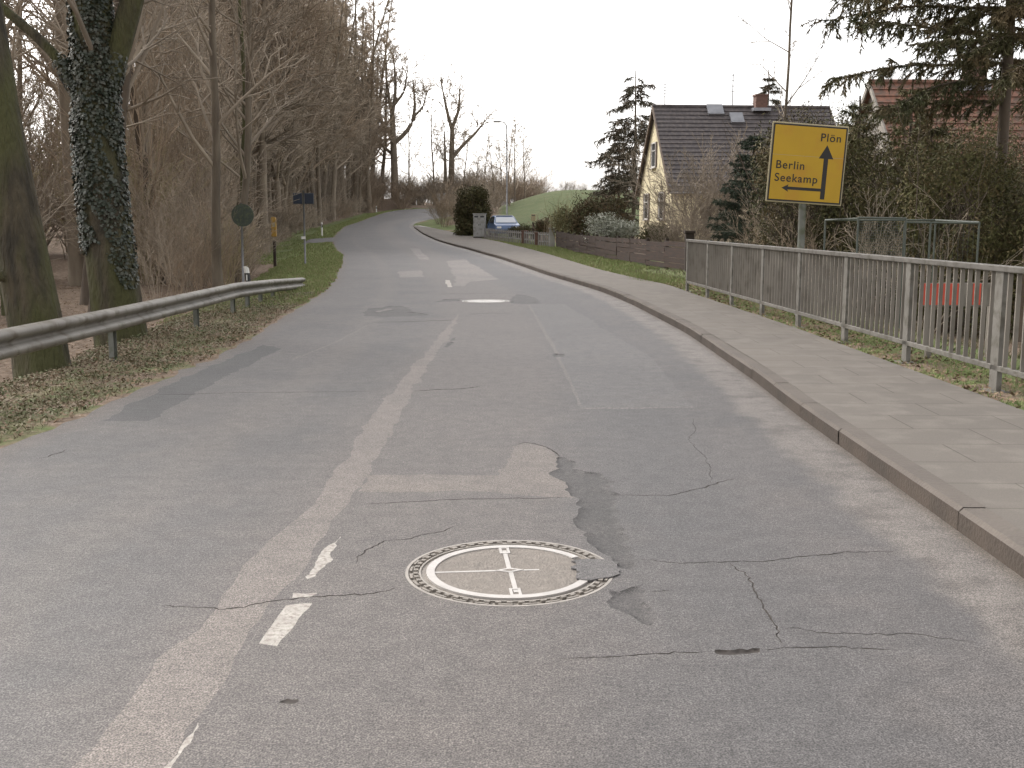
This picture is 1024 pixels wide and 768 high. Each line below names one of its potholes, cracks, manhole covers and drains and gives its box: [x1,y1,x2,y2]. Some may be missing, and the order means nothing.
crack [167,588,394,610]
crack [642,420,736,496]
crack [357,526,454,562]
manhole cover [405,540,613,607]
crack [642,551,893,650]
